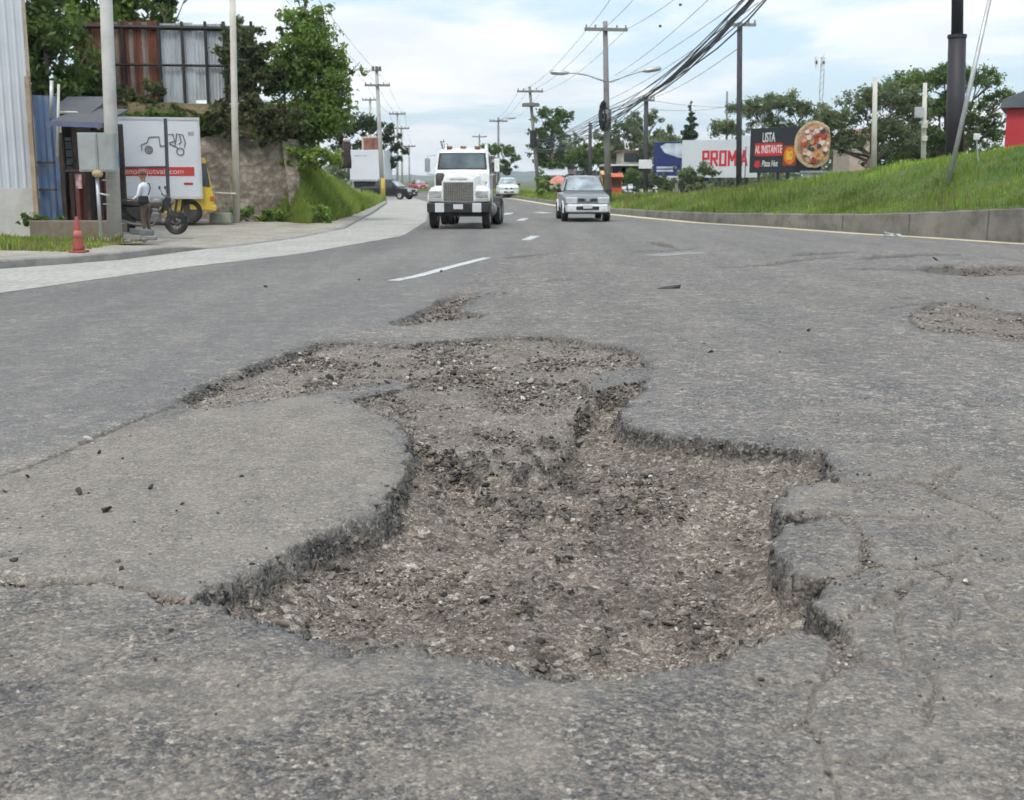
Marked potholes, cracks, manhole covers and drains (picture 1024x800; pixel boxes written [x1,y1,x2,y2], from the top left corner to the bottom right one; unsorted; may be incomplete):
pothole [901,300,1024,344]
crack [746,462,1024,800]
pothole [166,335,864,685]
crack [0,574,196,607]
pothole [910,264,1024,278]
pothole [384,291,510,327]
